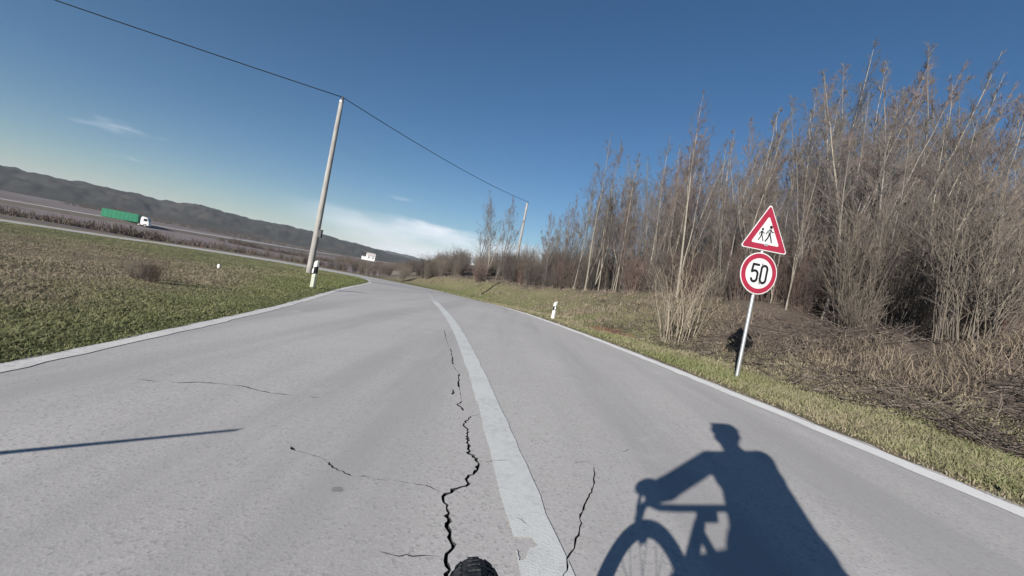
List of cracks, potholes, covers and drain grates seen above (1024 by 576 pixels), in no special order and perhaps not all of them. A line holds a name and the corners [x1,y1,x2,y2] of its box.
crack [563,449,629,576]
crack [290,330,492,576]
crack [141,379,318,398]
